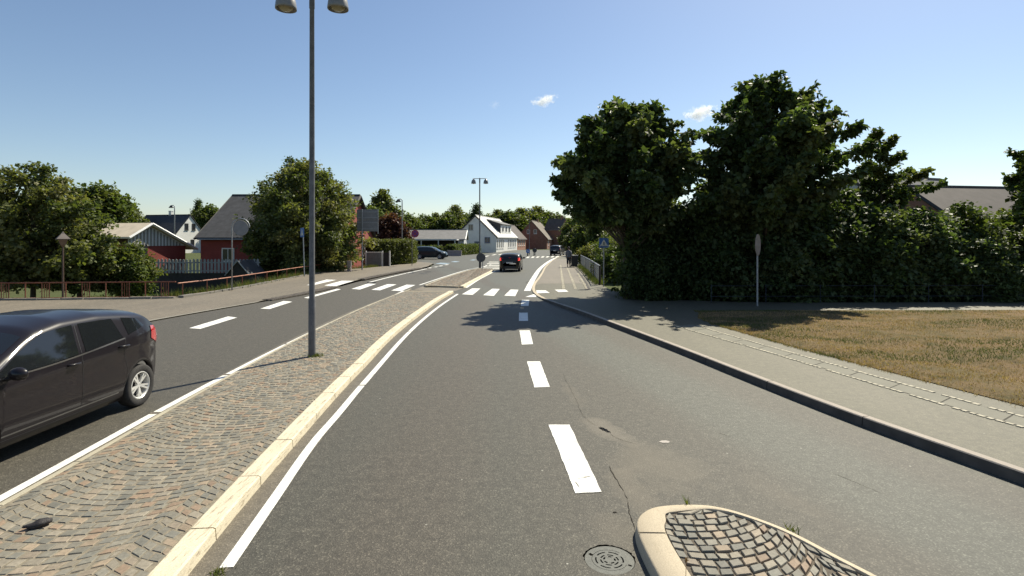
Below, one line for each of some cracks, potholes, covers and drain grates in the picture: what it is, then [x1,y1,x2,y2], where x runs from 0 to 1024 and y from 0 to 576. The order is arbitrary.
manhole cover [583,546,636,575]
